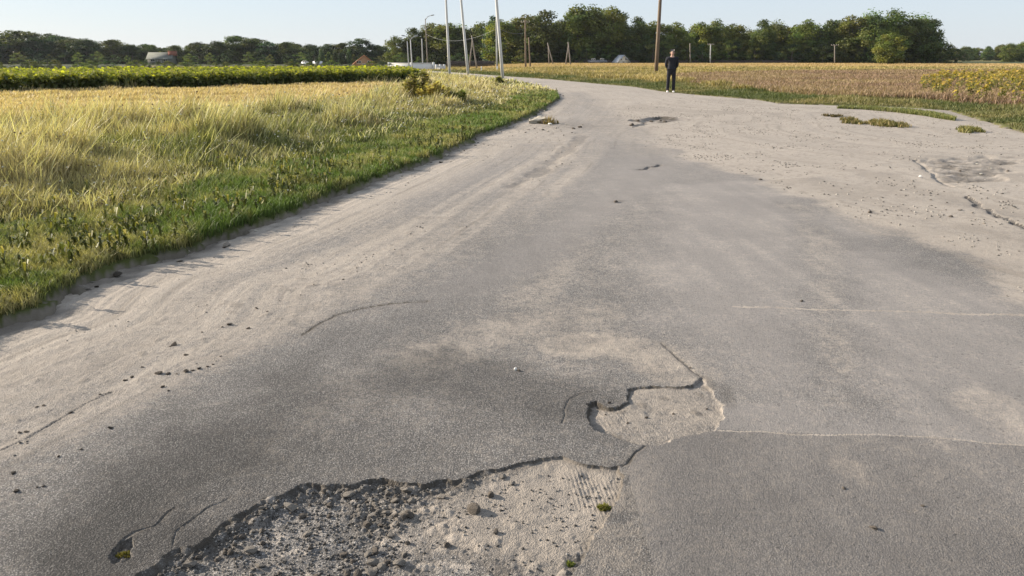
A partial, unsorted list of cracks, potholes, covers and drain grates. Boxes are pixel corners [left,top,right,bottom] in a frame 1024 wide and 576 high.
pothole [134,456,624,576]
crack [0,392,112,451]
pothole [586,378,725,446]
crack [121,498,229,546]
pothole [912,154,1024,187]
crack [964,196,1024,229]
crack [660,343,704,379]
pothole [628,116,689,128]
